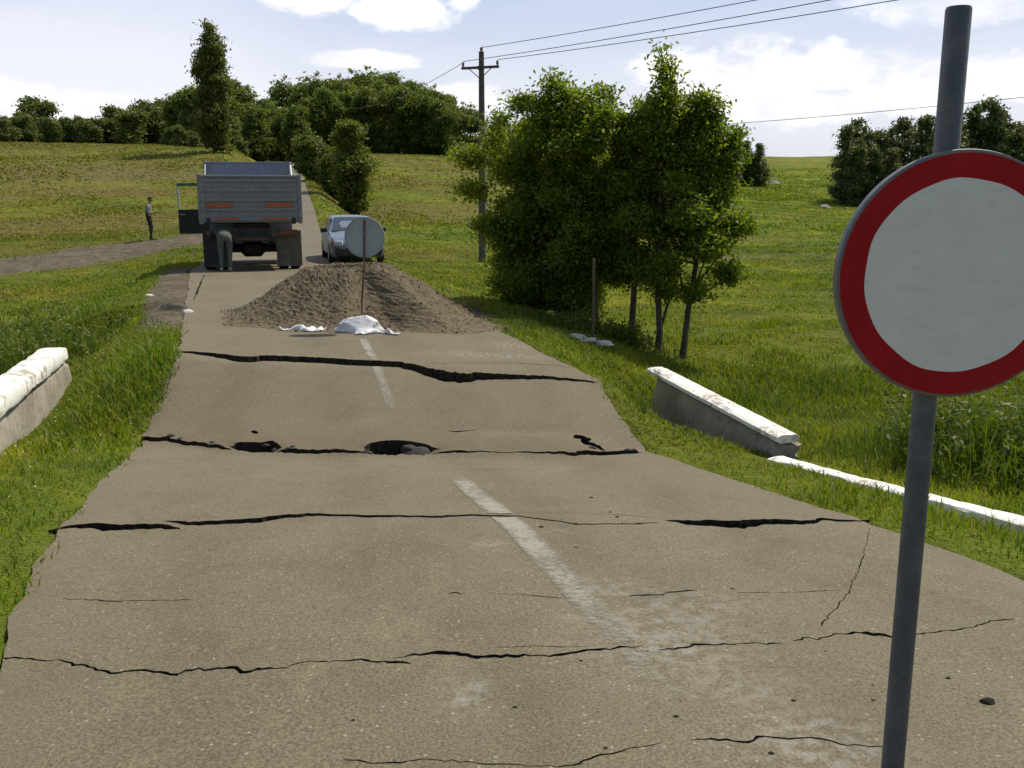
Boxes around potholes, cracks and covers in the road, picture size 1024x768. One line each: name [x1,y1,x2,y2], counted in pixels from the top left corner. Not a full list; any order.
crack [344,742,662,767]
pothole [229,441,281,453]
crack [141,435,642,456]
pothole [364,440,438,455]
crack [180,351,594,383]
crack [691,736,883,747]
crack [3,512,1013,676]
